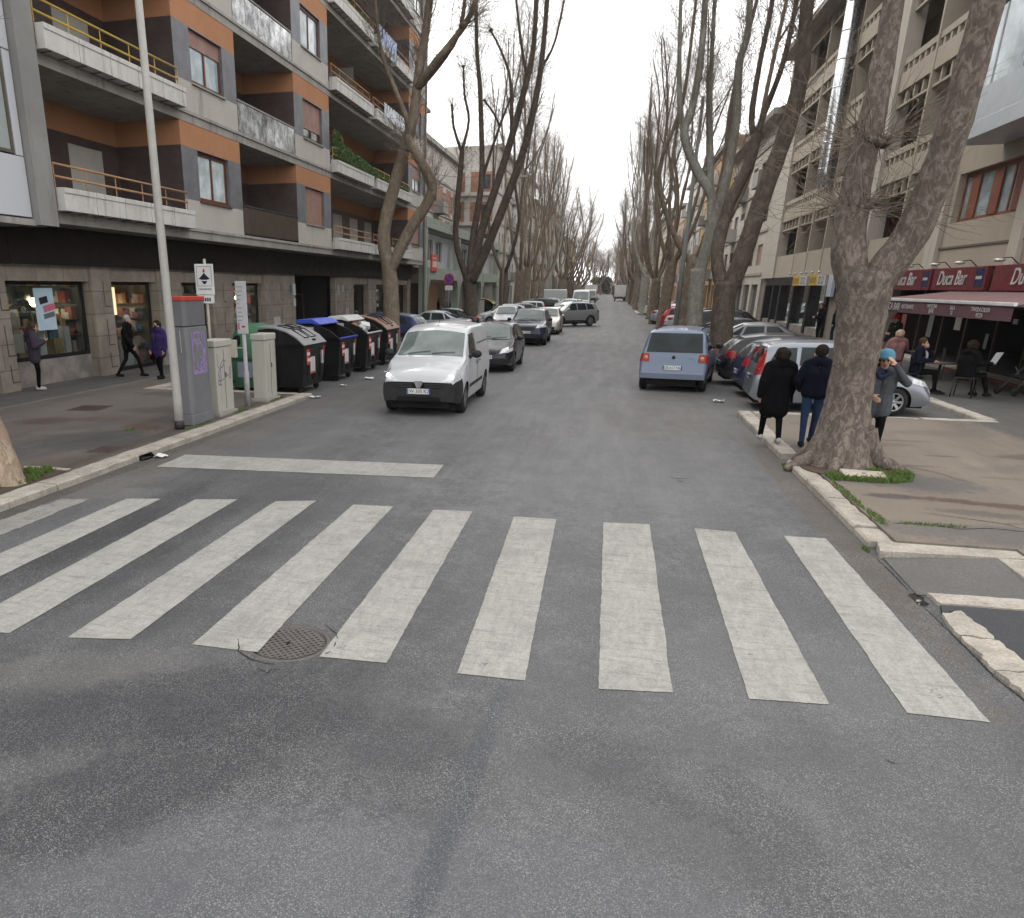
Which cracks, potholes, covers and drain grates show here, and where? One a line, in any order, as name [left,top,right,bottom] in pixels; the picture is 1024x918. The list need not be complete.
utility cover [83,445,131,454]
crack [237,639,277,673]
manhole cover [247,625,332,662]
